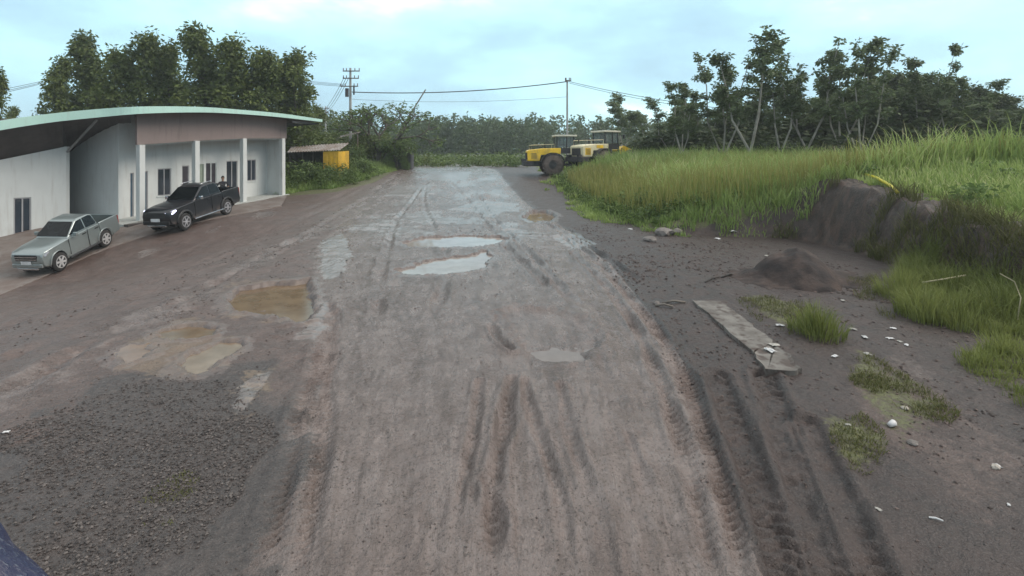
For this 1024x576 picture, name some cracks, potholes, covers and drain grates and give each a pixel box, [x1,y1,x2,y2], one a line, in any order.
pothole [395,234,512,249]
pothole [521,209,559,223]
pothole [217,276,324,325]
pothole [391,249,499,276]
